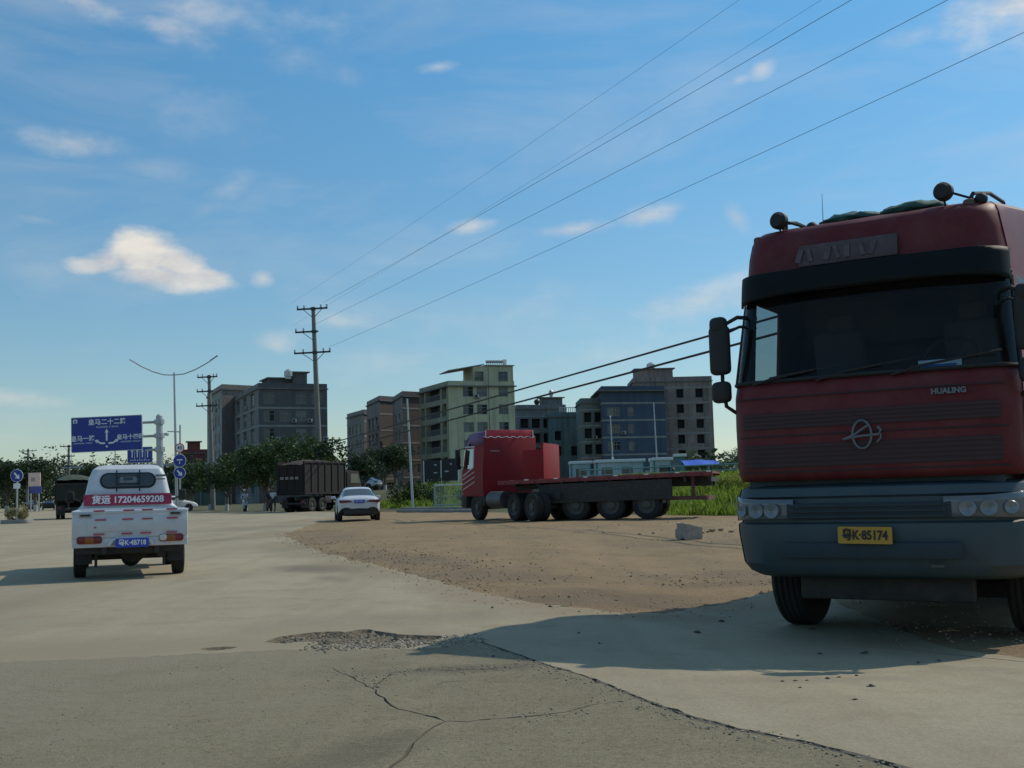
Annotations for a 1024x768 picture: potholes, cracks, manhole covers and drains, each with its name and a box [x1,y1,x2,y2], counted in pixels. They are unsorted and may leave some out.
pothole [266,629,441,648]
crack [323,640,910,768]
